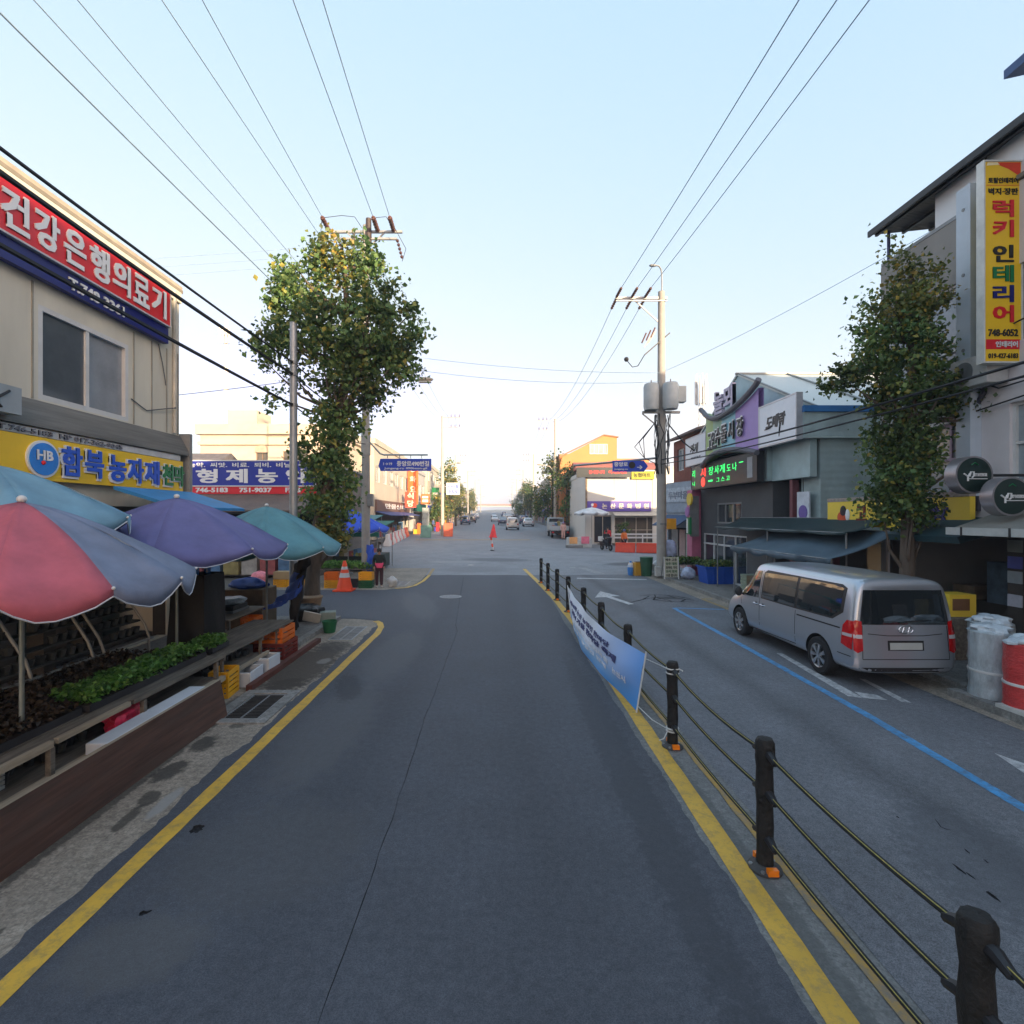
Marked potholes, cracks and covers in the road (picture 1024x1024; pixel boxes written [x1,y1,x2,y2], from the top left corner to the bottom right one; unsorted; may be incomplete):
drain grate [328,626,368,640]
crack [630,595,690,603]
crack [318,582,463,1023]
drain grate [224,694,286,718]
